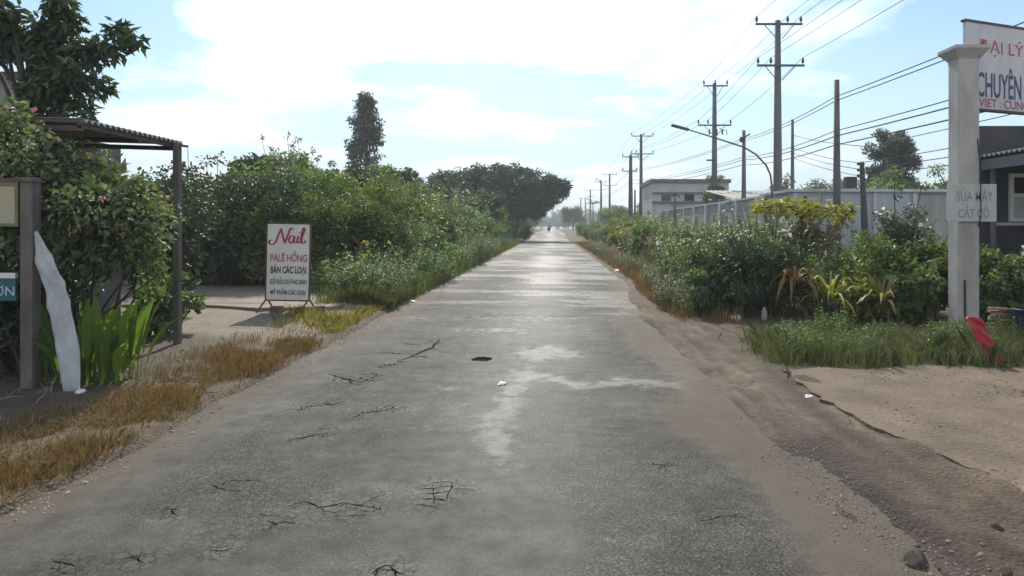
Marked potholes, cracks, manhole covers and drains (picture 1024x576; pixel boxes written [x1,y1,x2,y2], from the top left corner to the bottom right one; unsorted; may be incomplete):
crack [50,561,88,575]
crack [329,340,446,386]
crack [252,495,382,531]
crack [366,565,414,576]
crack [291,401,407,441]
